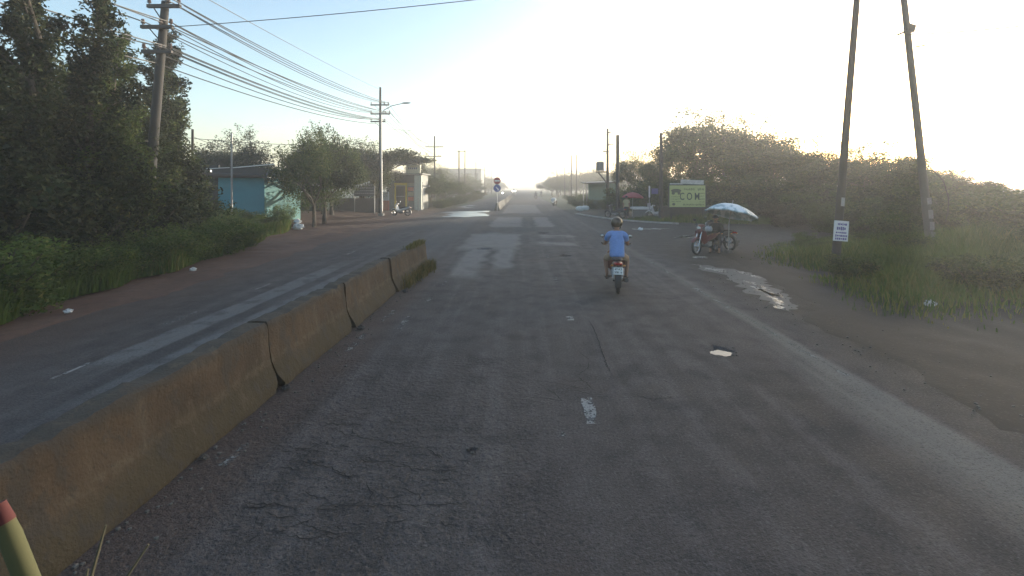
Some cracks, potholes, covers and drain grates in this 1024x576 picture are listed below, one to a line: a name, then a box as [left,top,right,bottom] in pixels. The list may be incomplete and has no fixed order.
crack [218,412,470,542]
pothole [704,345,738,357]
crack [519,321,610,401]
